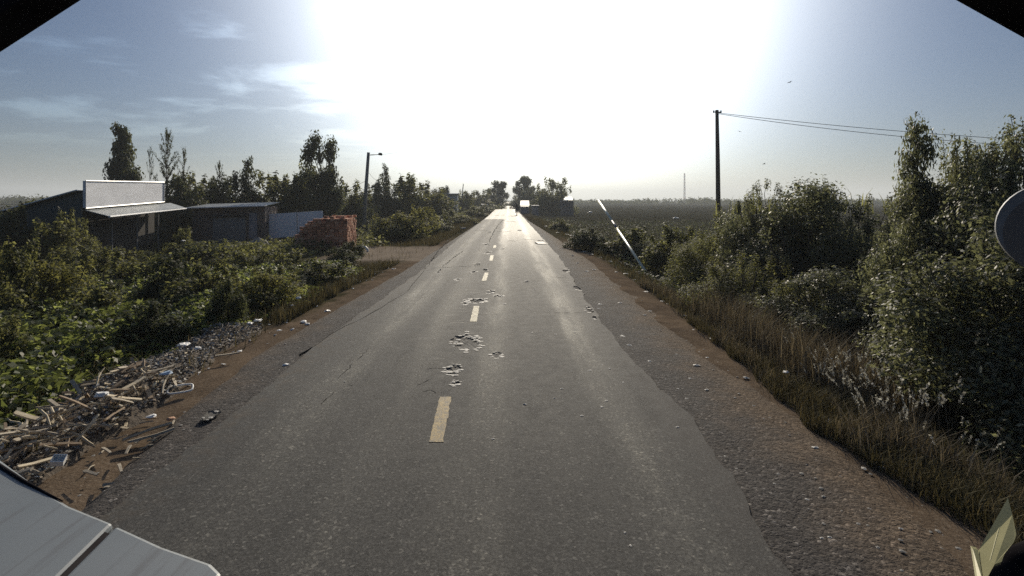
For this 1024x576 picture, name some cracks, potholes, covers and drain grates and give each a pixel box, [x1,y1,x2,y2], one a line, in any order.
pothole [441,364,463,376]
pothole [449,331,485,353]
crack [299,240,465,356]
